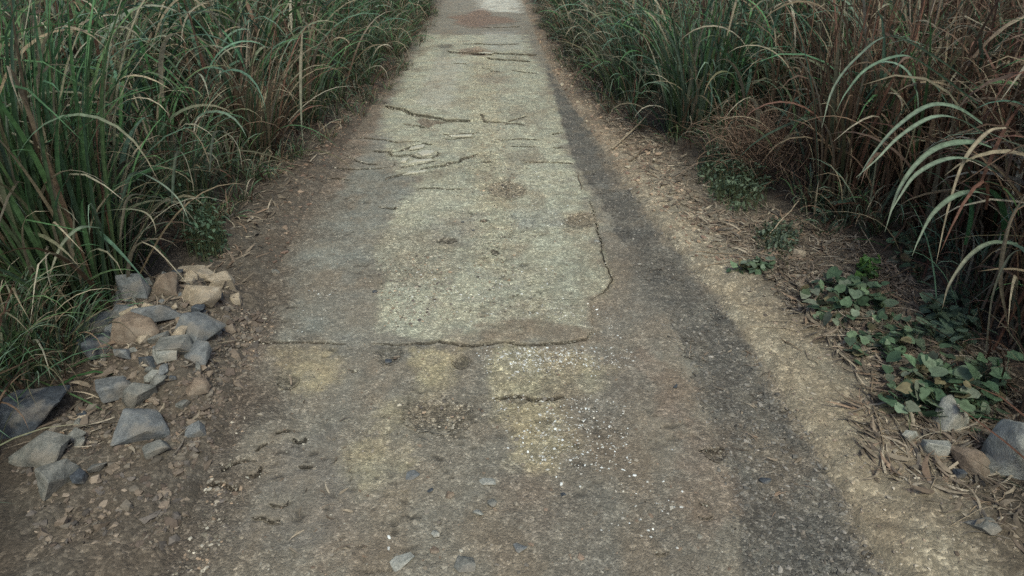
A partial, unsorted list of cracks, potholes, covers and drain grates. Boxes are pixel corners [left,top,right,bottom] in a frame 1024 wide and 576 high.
pothole [485,179,530,200]
pothole [402,397,479,435]
crack [207,26,721,556]
pothole [562,212,598,229]
